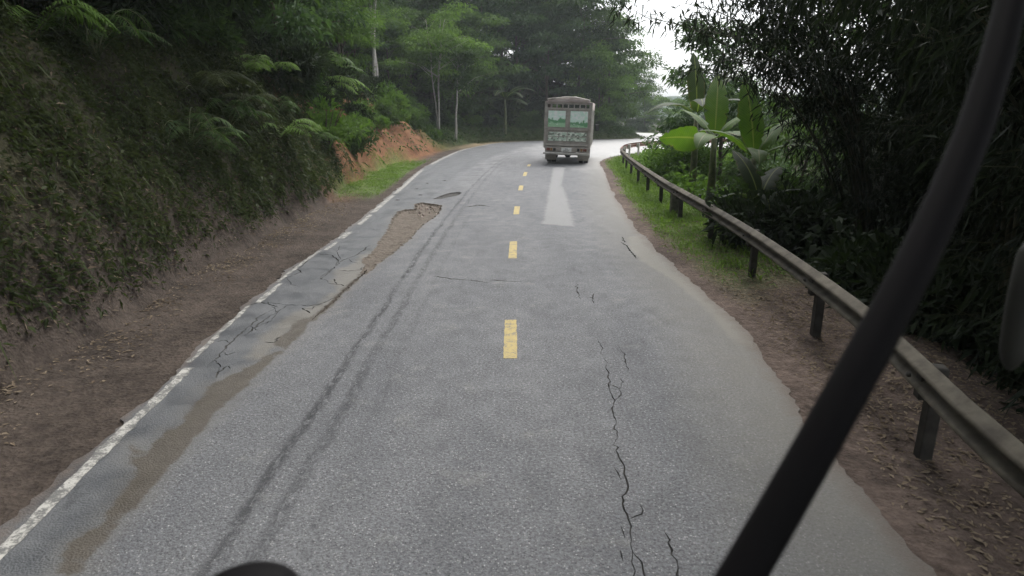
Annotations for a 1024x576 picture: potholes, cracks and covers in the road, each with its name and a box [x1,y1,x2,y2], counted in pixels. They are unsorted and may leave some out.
pothole [360,203,442,274]
crack [207,246,369,378]
crack [598,341,645,576]
crack [664,531,693,576]
